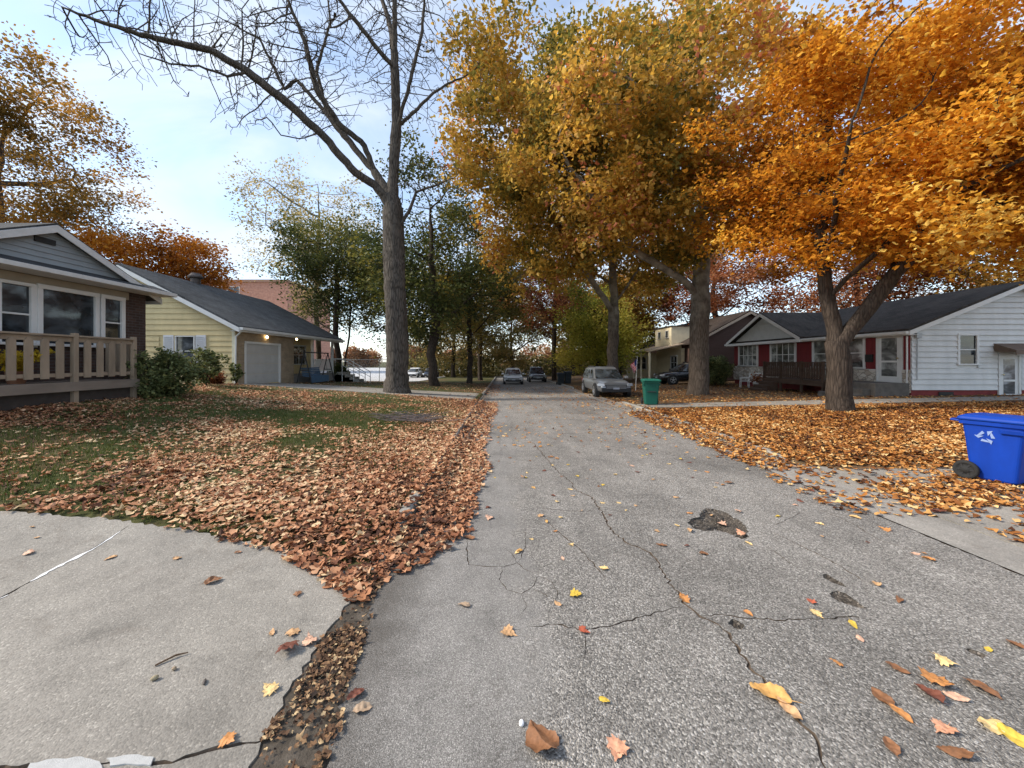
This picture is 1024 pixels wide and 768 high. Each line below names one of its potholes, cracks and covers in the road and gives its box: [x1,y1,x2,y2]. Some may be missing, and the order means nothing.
crack [466,531,558,617]
pothole [687,508,749,539]
crack [531,443,872,768]
